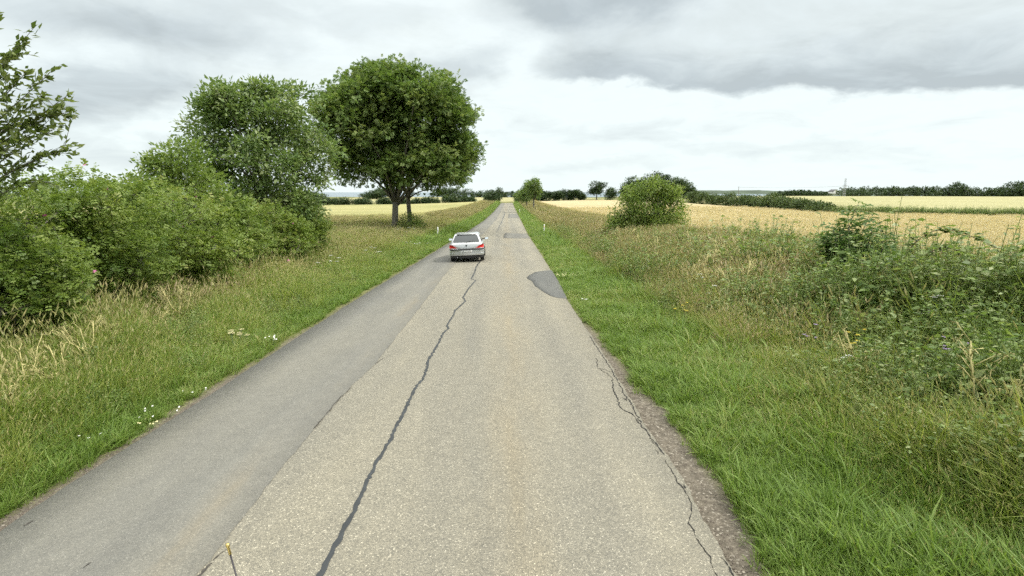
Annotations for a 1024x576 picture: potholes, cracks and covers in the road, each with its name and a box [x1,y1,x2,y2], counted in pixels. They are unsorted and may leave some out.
crack [589,335,734,576]
